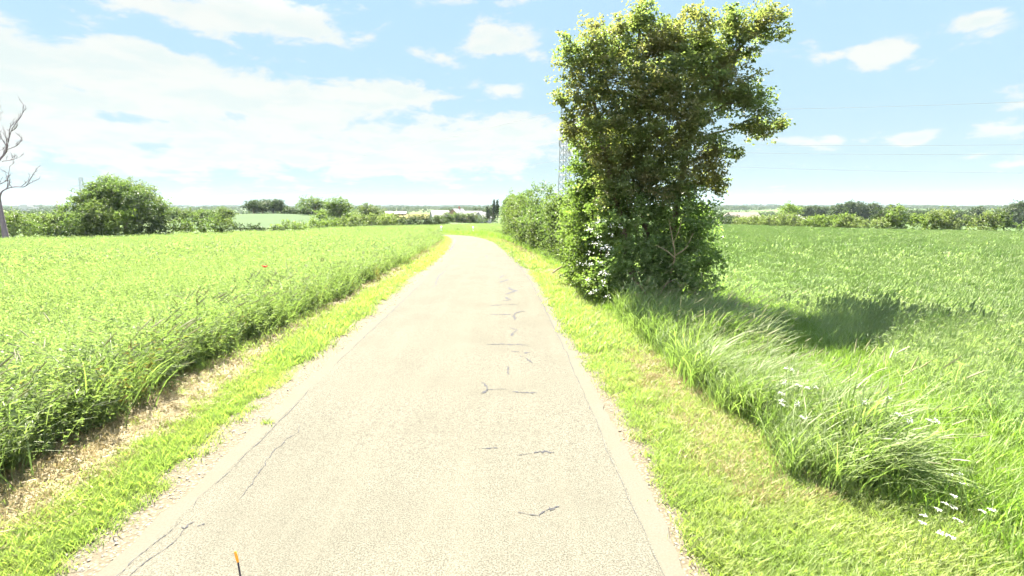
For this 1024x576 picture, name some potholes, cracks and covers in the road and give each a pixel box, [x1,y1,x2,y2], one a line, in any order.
crack [117,392,307,576]
crack [482,250,664,575]
